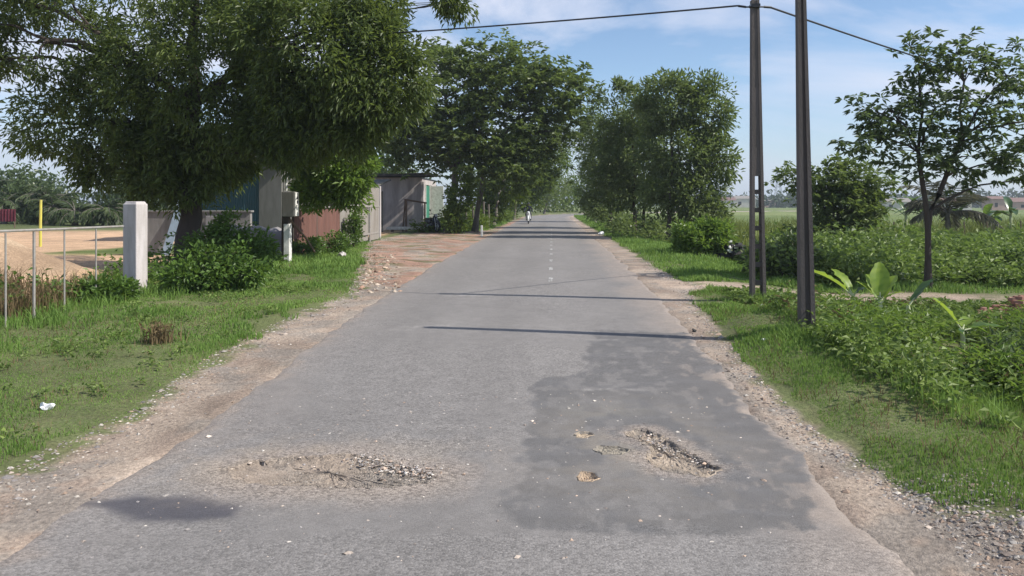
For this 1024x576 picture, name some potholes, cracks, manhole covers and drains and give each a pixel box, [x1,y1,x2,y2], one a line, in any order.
pothole [225,453,438,490]
pothole [592,445,630,455]
pothole [577,471,601,482]
pothole [624,428,723,478]
